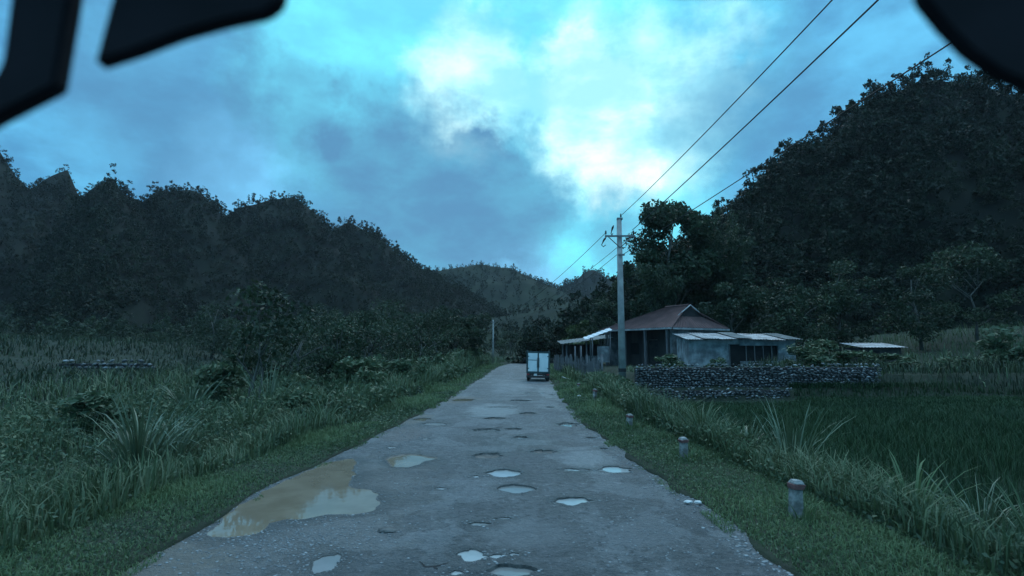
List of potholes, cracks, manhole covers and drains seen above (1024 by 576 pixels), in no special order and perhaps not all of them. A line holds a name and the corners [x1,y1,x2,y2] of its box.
pothole [312,553,342,573]
pothole [385,453,438,467]
pothole [456,548,488,562]
pothole [485,563,538,576]
pothole [484,469,522,477]
pothole [497,484,537,493]
pothole [553,497,593,506]
pothole [207,458,381,538]
